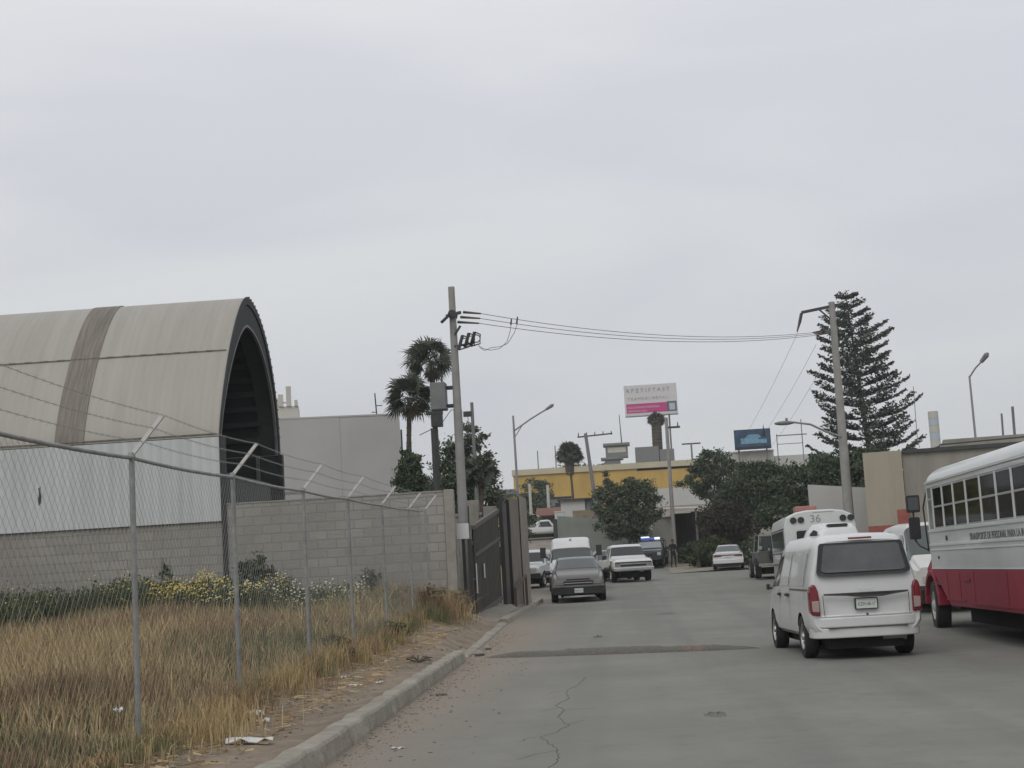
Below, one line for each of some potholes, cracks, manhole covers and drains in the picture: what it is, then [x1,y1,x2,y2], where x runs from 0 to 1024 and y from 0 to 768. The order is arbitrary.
crack [518,677,589,768]
